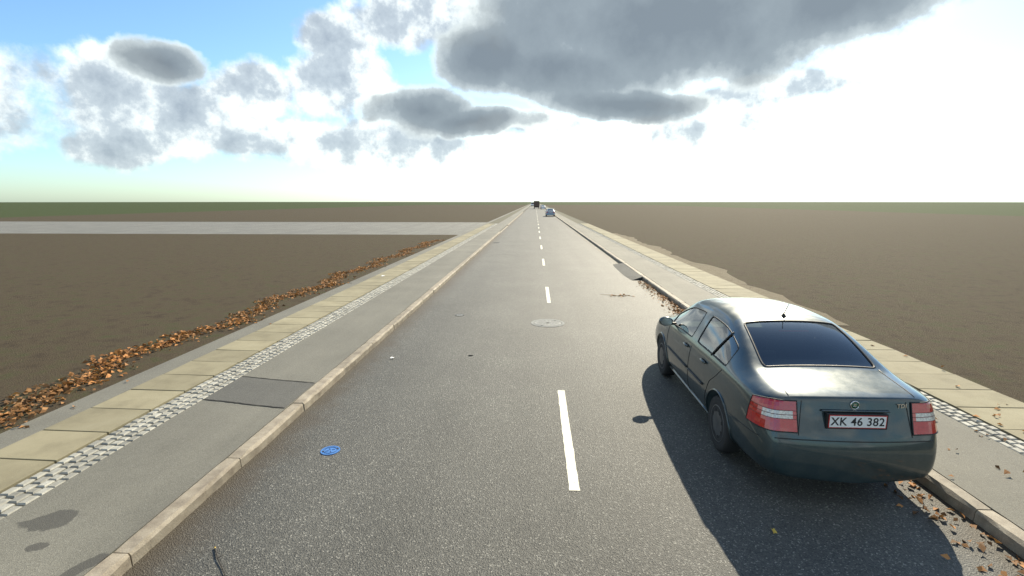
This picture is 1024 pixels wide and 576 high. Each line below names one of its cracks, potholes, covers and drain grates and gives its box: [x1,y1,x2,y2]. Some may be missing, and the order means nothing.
utility cover [320,446,340,455]
manhole cover [531,319,565,327]
